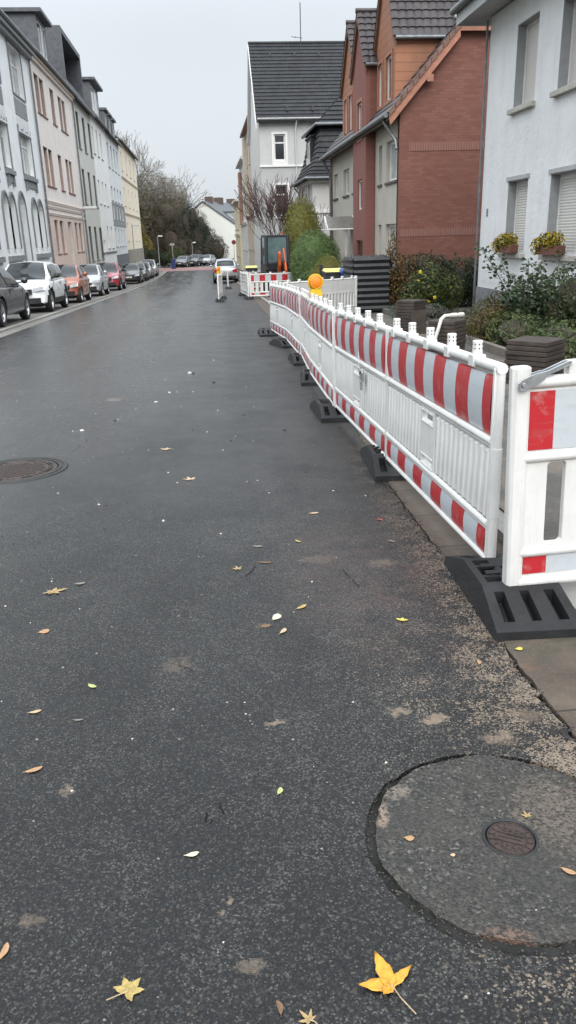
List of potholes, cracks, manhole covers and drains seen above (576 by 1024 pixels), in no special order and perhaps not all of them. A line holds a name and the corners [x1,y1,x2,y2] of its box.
manhole cover [0,457,68,484]
manhole cover [482,818,539,858]
